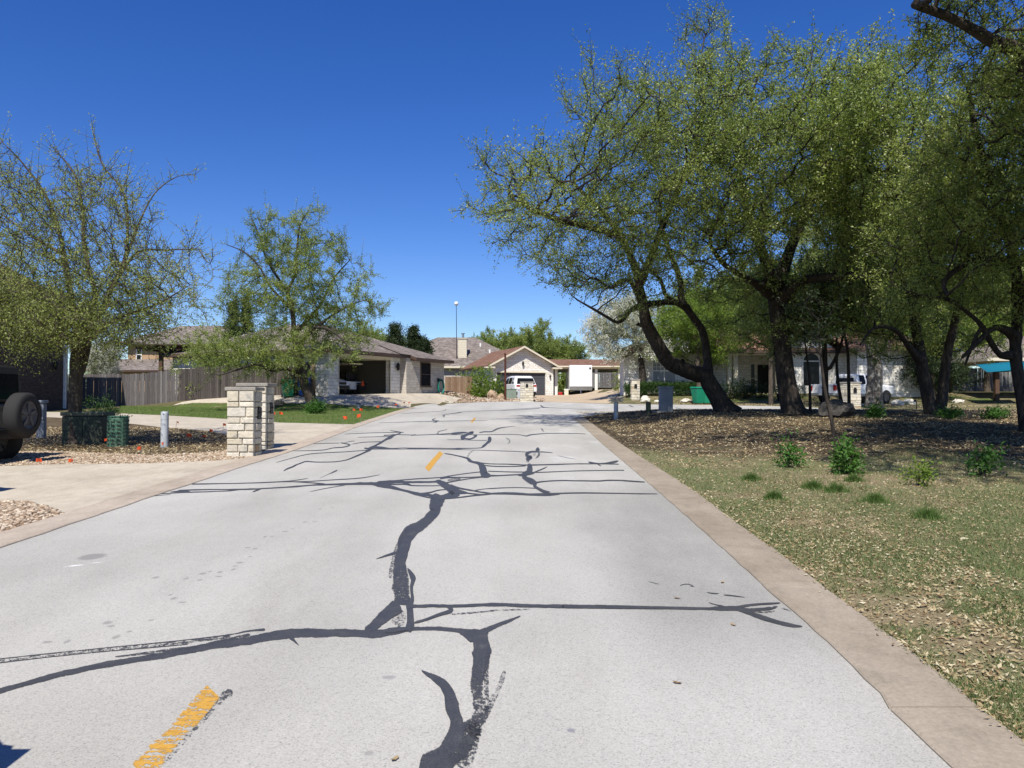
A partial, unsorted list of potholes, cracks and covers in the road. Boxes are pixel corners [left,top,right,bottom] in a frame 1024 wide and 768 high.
crack [507,438,572,463]
crack [385,408,540,423]
